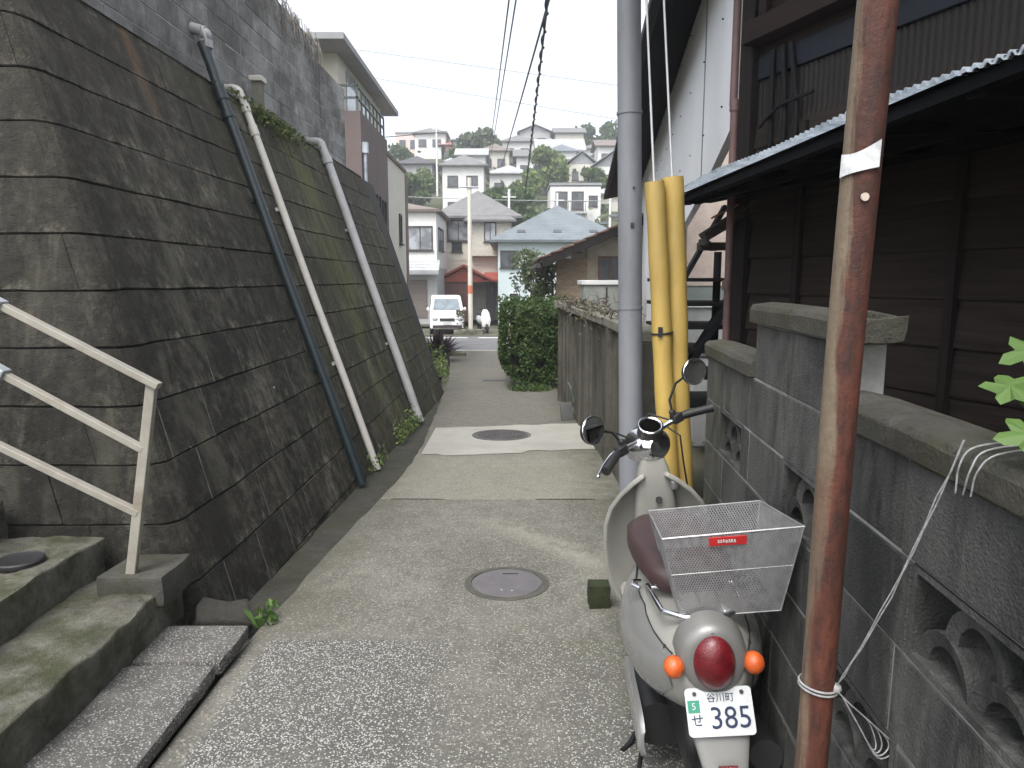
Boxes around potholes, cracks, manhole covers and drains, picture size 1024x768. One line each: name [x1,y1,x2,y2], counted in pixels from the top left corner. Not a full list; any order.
manhole cover [472,429,531,441]
manhole cover [464,567,549,601]
